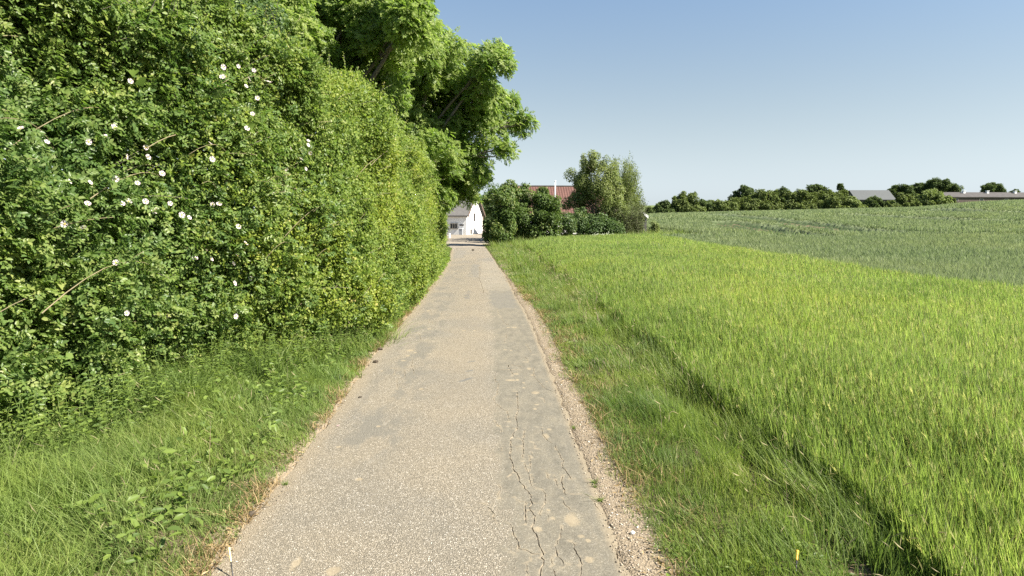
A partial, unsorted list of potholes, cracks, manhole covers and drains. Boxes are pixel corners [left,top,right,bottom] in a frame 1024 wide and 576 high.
crack [488,347,598,576]
